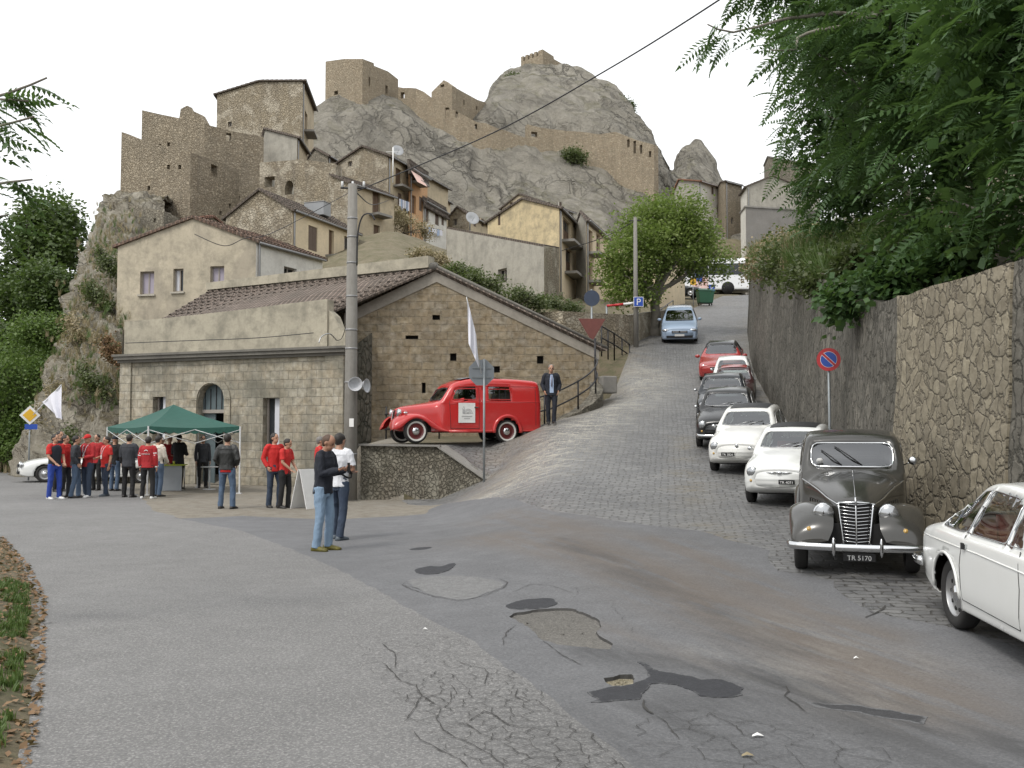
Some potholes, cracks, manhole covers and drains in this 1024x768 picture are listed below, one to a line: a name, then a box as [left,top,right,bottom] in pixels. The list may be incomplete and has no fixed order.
crack [629,686,891,768]
crack [356,634,625,768]
pothole [509,608,613,649]
pothole [604,674,635,686]
